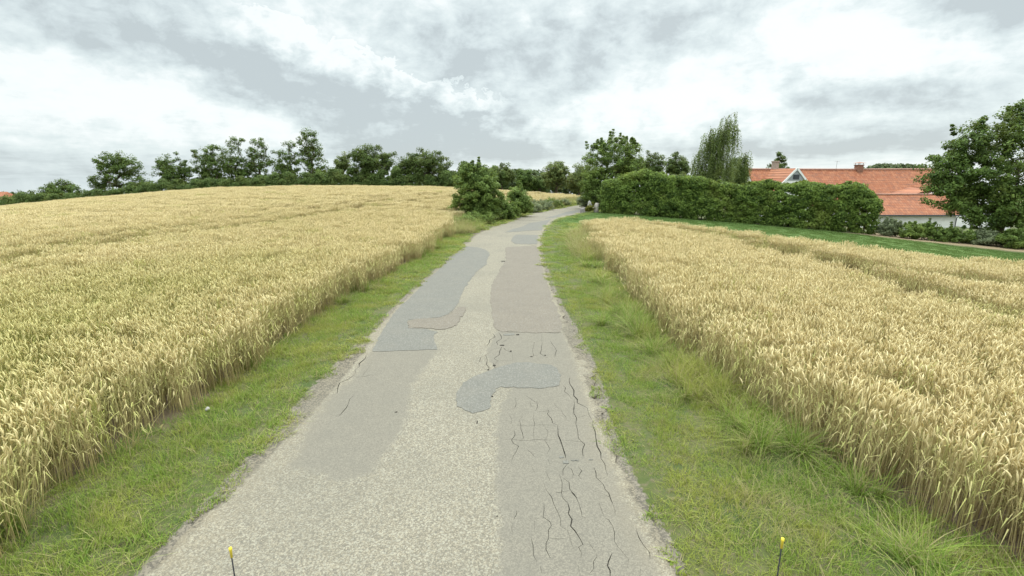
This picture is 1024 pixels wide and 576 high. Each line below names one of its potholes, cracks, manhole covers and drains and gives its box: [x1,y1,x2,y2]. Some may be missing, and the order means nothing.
crack [511,379,650,575]
